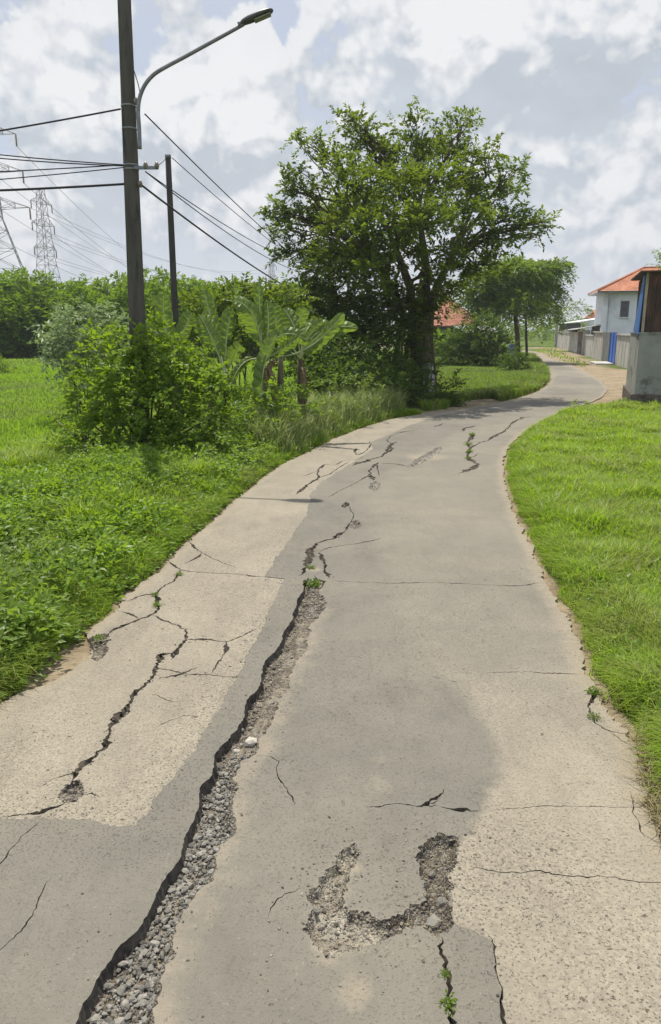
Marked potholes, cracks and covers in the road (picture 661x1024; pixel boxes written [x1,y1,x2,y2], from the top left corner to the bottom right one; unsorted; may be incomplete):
crack [297,423,443,589]
crack [585,695,629,745]
crack [0,882,47,950]
crack [458,417,524,474]
crack [471,866,661,883]
pothole [301,832,460,959]
crack [488,934,507,1024]
crack [264,755,295,803]
crack [0,542,264,864]
